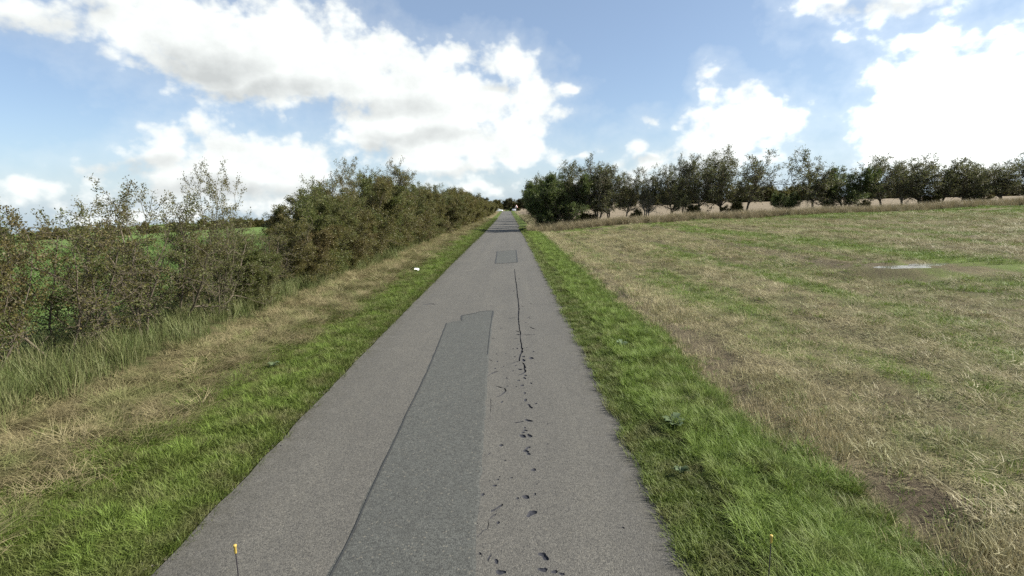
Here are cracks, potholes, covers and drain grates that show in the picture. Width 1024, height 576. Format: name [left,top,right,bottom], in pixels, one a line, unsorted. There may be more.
crack [488,269,534,412]
